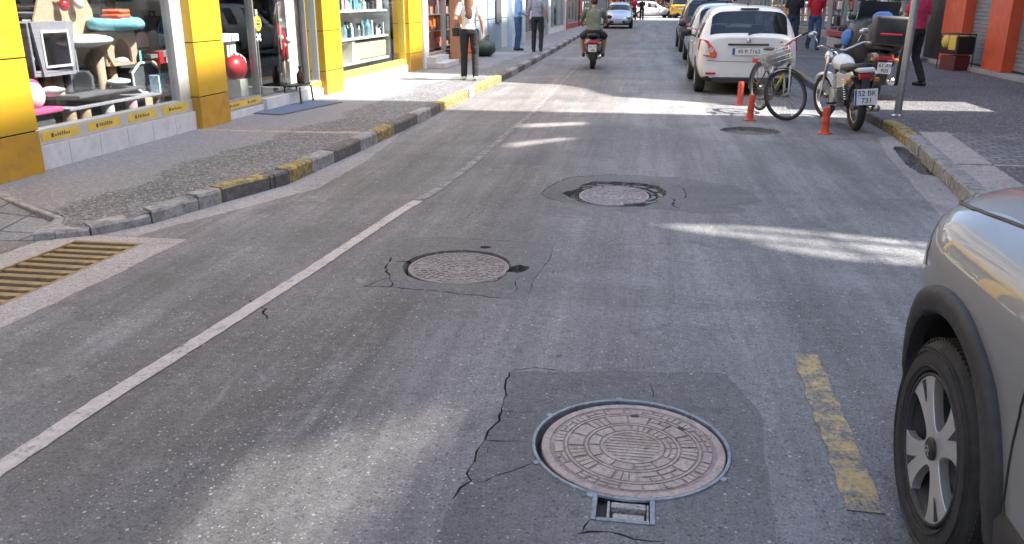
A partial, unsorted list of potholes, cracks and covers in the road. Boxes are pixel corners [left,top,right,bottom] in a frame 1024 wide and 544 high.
pothole [506,265,529,273]
drain grate [0,240,142,306]
crack [364,237,553,299]
manhole cover [575,186,652,207]
manhole cover [403,250,514,284]
crack [453,367,568,499]
manhole cover [532,397,732,526]
